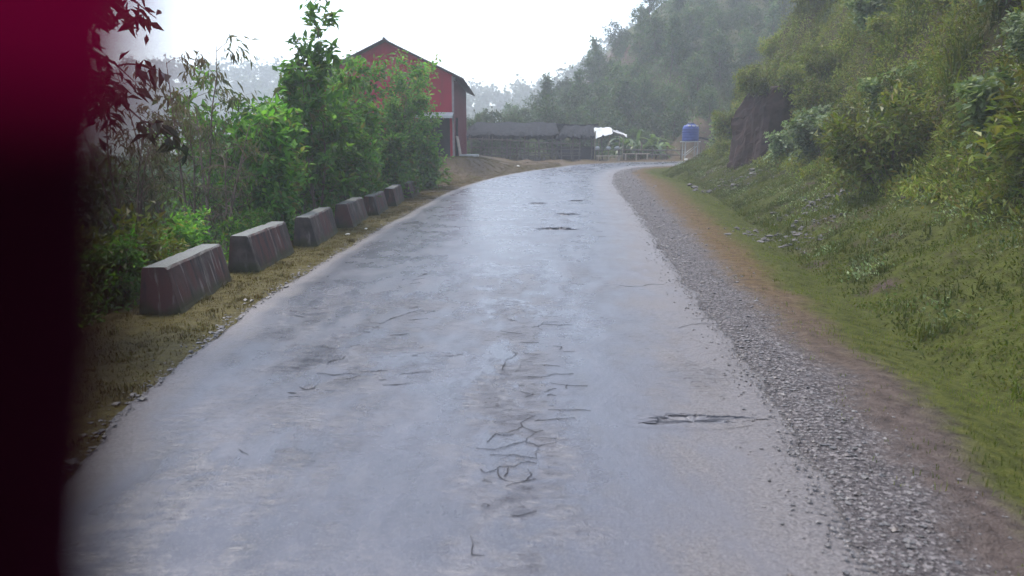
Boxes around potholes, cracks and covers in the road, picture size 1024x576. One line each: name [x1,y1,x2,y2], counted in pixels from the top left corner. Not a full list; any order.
pothole [623,409,767,430]
crack [477,319,591,486]
crack [288,307,461,397]
